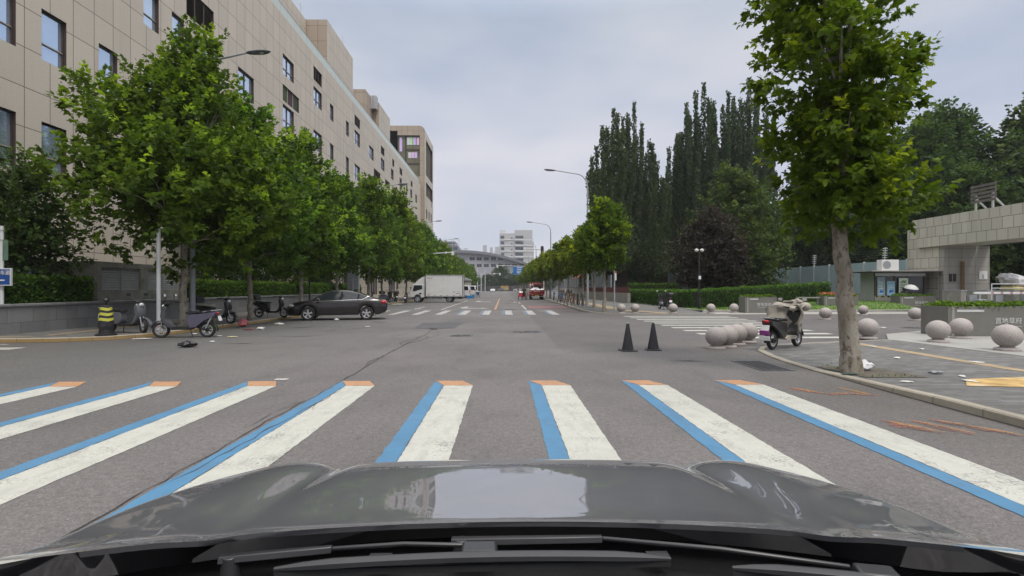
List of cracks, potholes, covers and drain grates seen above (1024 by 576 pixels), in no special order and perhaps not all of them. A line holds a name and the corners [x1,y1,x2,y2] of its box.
drain grate [732,361,795,371]
